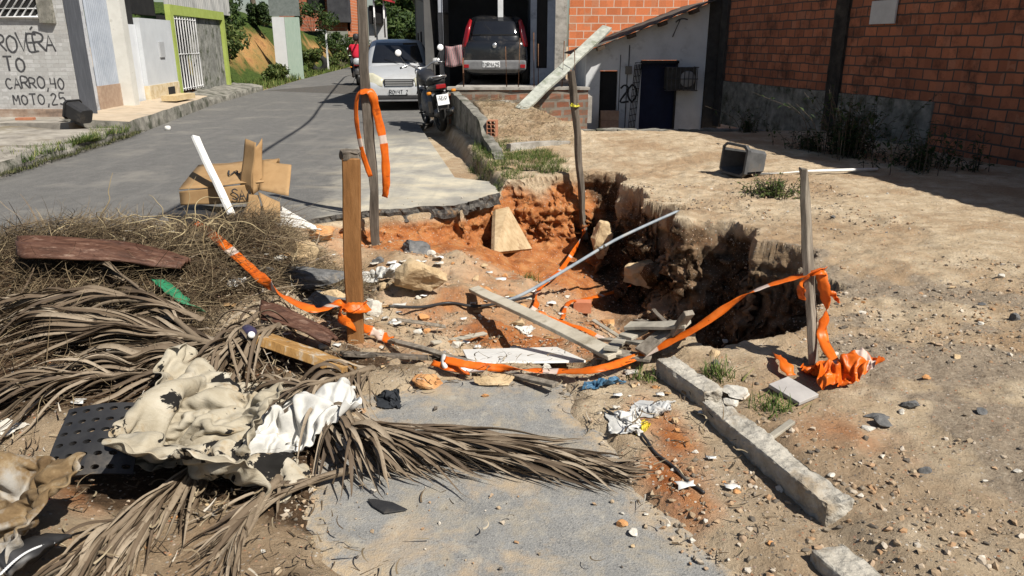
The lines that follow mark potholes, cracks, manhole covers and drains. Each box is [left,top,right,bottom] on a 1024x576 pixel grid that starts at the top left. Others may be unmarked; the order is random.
pothole [261,171,851,380]
